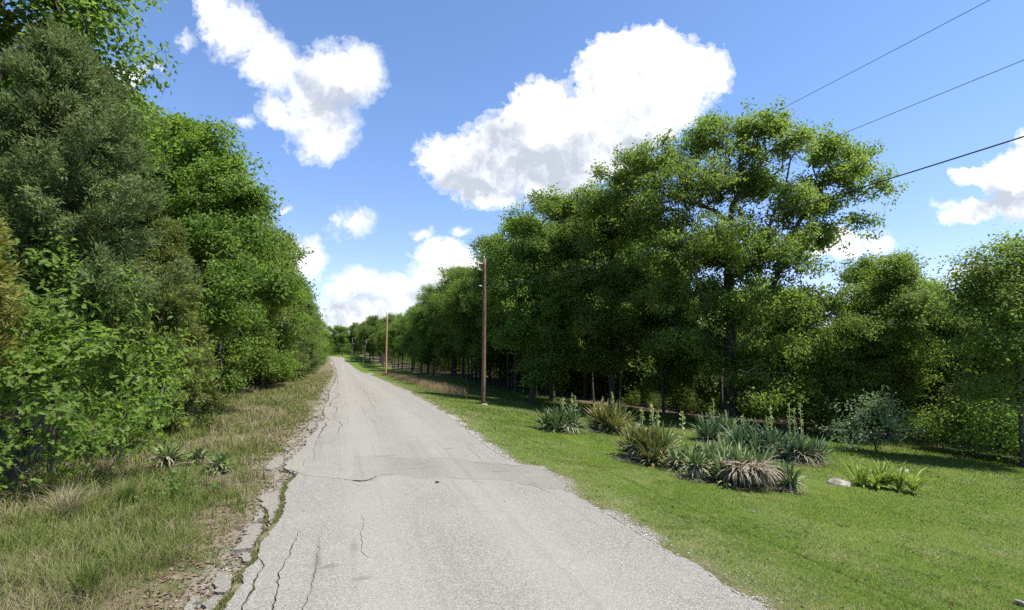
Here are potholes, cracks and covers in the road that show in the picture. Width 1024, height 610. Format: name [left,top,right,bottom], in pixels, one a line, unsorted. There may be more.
crack [212,378,392,610]
